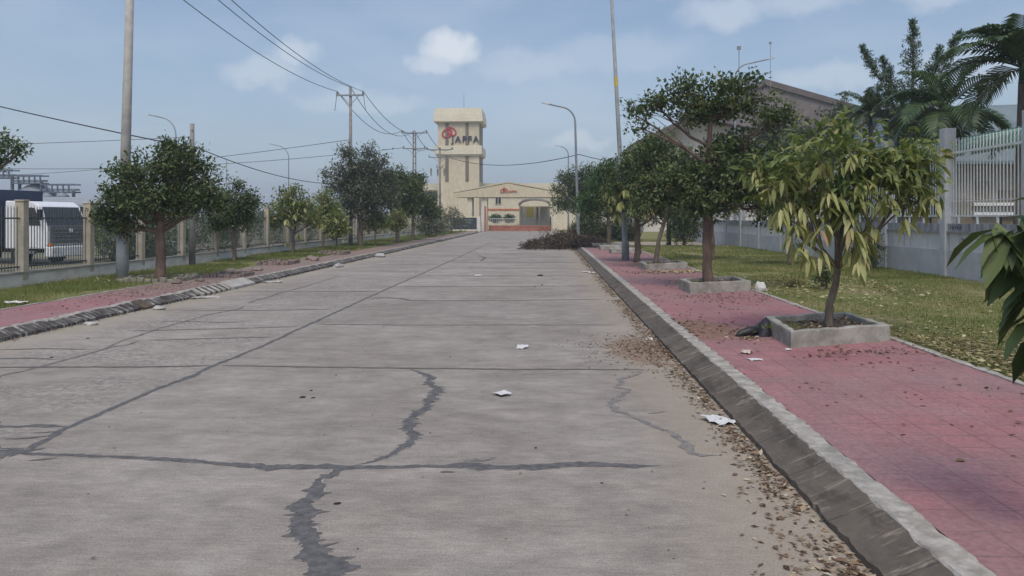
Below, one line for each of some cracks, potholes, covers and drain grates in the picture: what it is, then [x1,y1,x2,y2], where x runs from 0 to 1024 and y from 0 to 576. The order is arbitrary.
crack [607,370,711,456]
